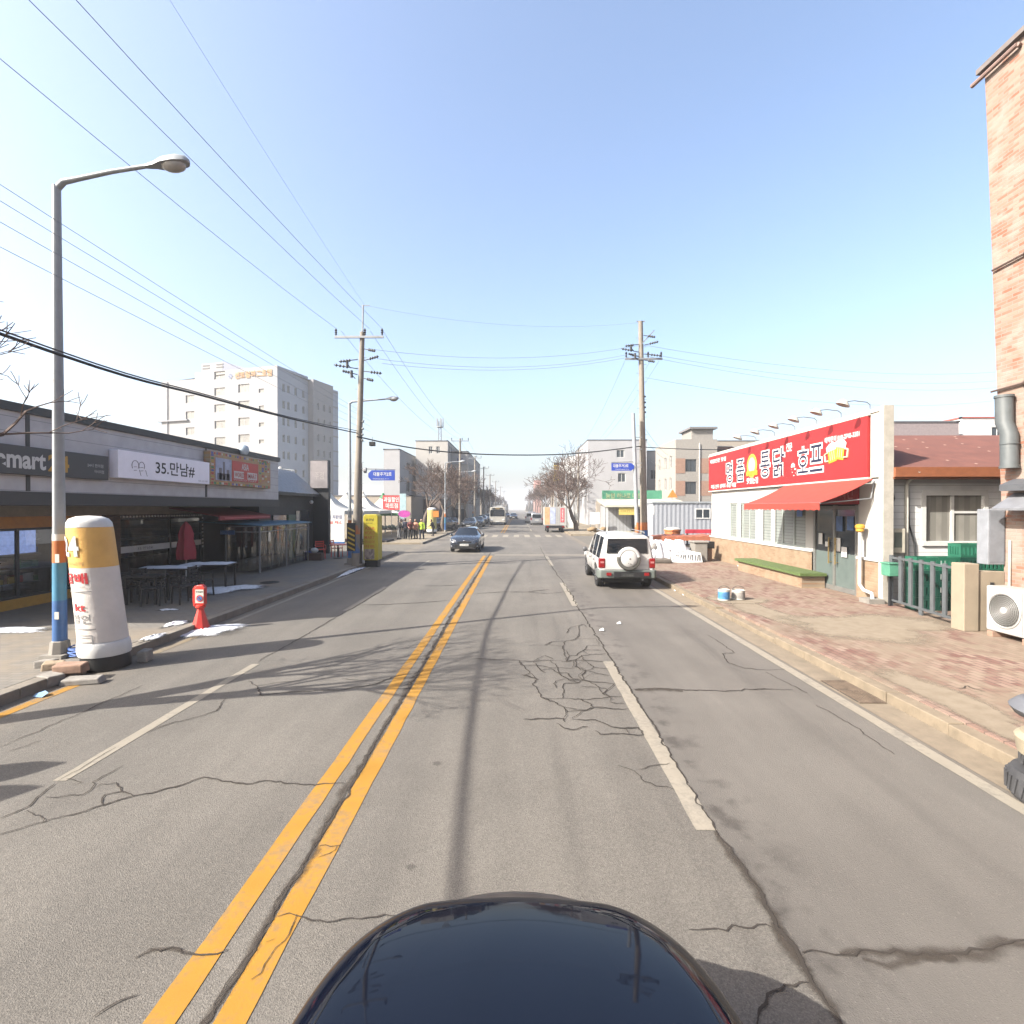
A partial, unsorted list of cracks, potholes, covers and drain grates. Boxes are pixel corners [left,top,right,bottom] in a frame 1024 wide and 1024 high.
crack [478,624,894,754]
crack [252,913,395,979]
crack [137,946,227,957]
crack [689,923,775,931]
crack [756,938,1024,1024]
drain grate [821,680,886,704]
crack [1,769,342,834]
